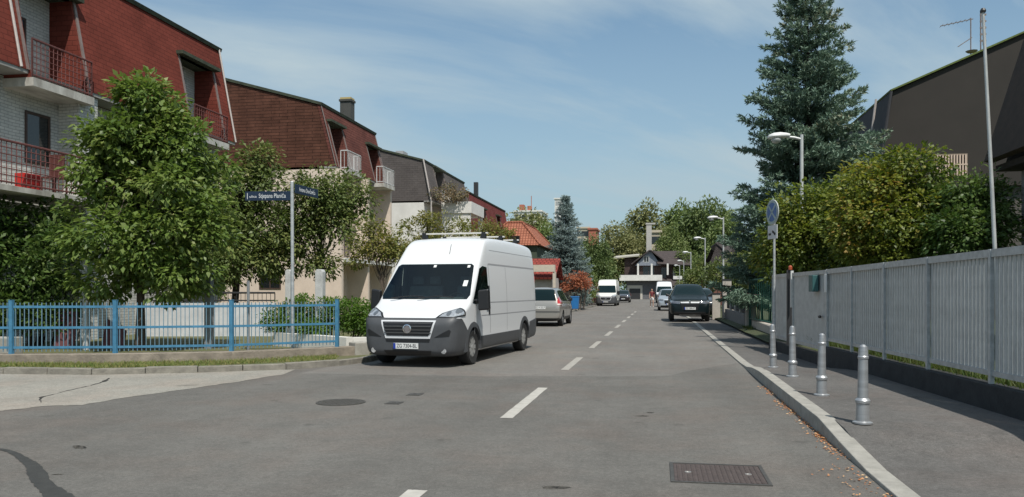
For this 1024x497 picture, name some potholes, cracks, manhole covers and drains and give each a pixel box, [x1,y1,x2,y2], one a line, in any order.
crack [39,378,110,402]
manhole cover [669,462,773,487]
